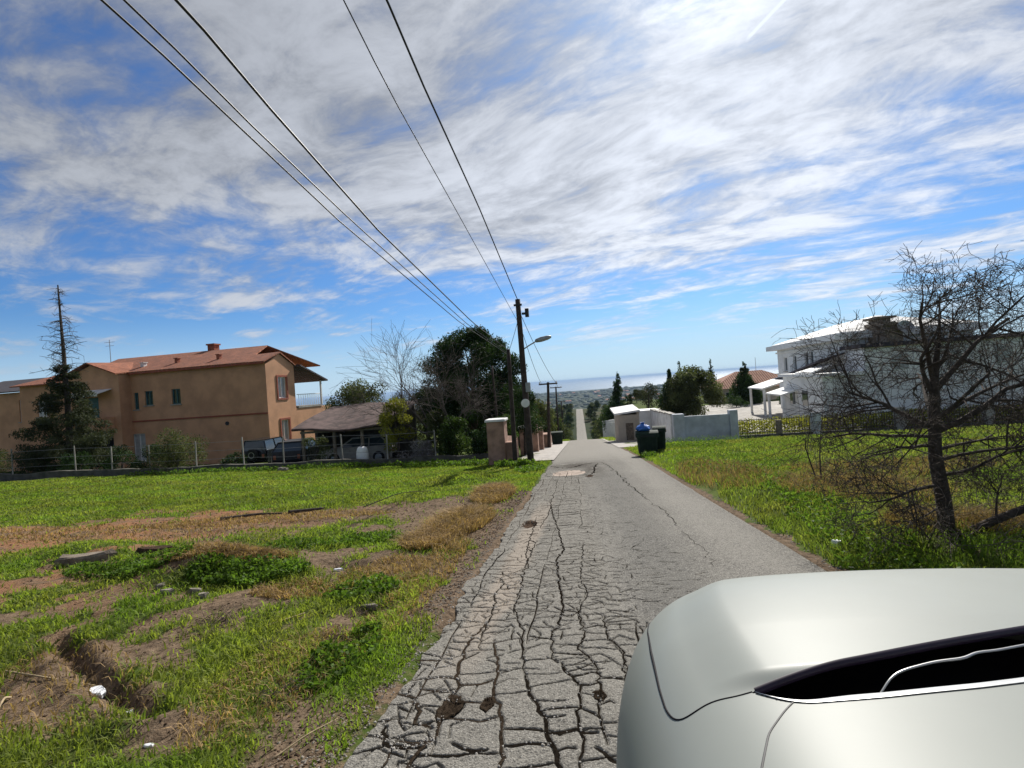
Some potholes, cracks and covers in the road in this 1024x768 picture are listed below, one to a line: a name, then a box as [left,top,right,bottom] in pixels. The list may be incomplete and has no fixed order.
pothole [479,696,495,713]
pothole [435,694,465,719]
crack [354,463,705,768]
